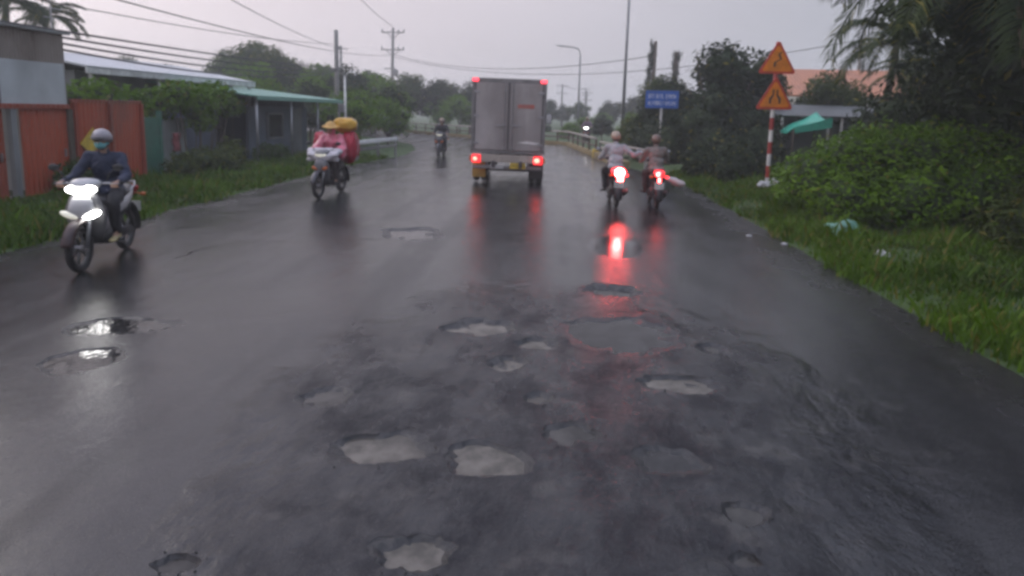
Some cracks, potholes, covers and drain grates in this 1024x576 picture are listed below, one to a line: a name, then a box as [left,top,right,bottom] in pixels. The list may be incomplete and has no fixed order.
pothole [43,317,187,336]
pothole [35,343,127,378]
pothole [148,551,208,576]
pothole [630,440,716,477]
pothole [322,426,439,468]
pothole [512,335,564,350]
pothole [294,384,354,408]
pothole [438,317,524,336]
pothole [379,226,444,241]
pothole [365,533,458,575]
pothole [578,282,645,297]
pothole [534,420,606,447]
